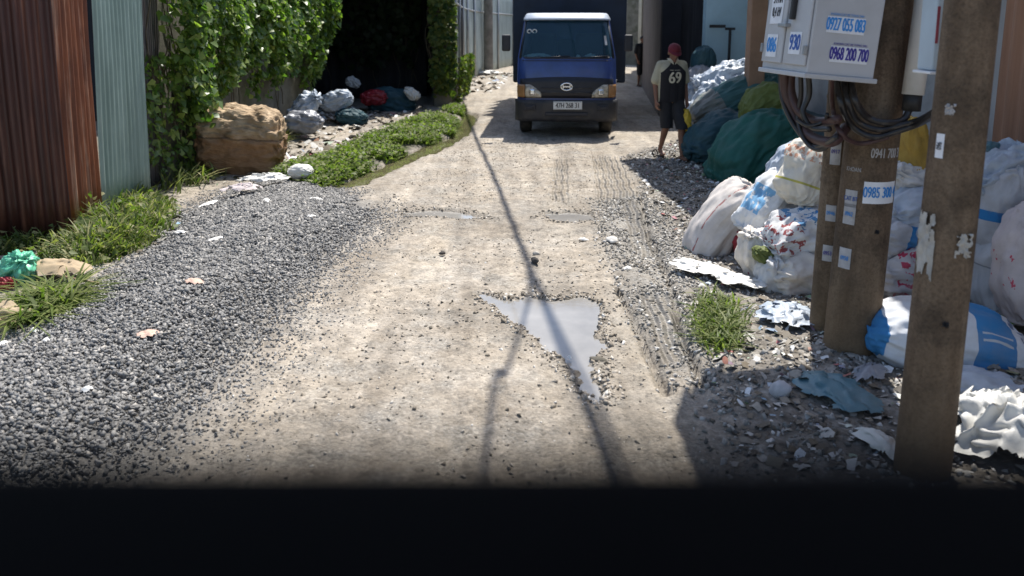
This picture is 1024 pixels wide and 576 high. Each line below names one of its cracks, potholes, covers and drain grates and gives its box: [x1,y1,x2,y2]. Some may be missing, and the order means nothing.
pothole [538,209,603,223]
pothole [468,290,620,407]
pothole [394,207,497,220]
